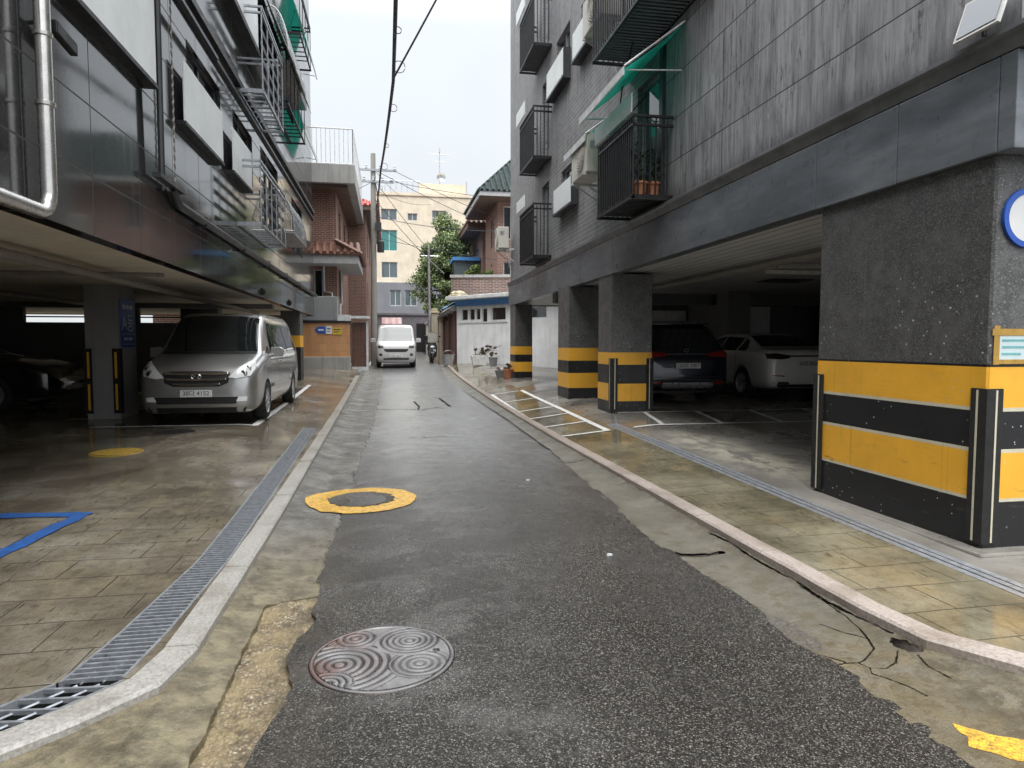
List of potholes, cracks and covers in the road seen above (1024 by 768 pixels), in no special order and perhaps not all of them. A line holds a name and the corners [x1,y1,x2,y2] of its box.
crack [676,534,928,675]
drain grate [0,680,123,731]
manhole cover [308,626,455,695]
drain grate [58,427,316,707]
